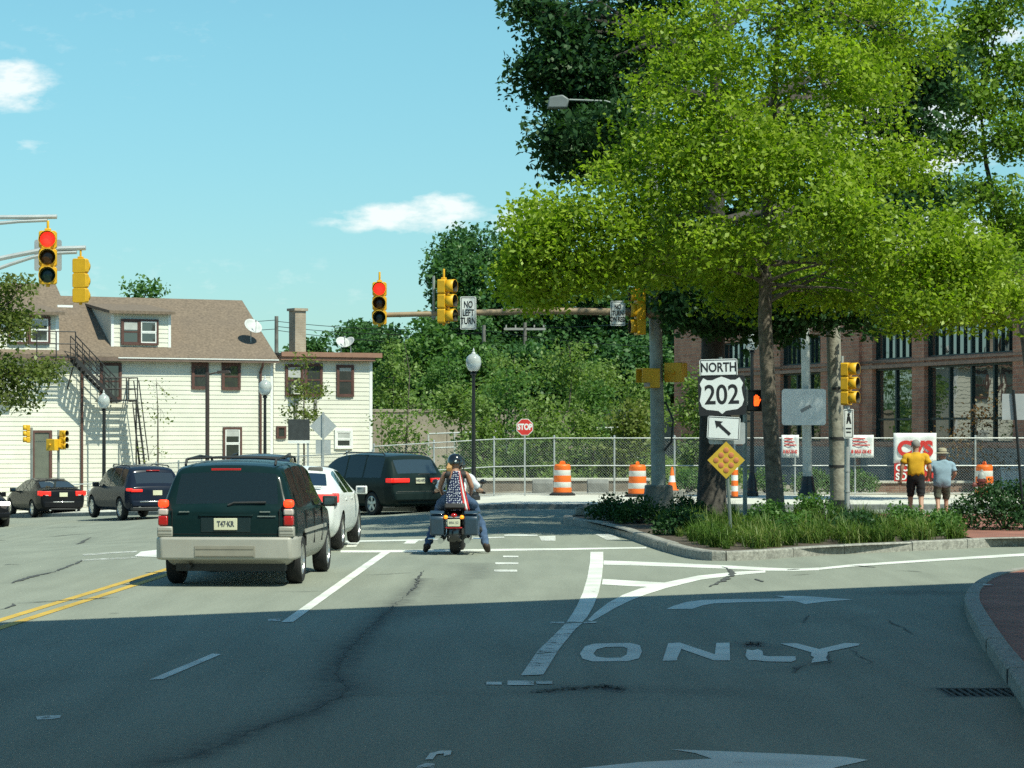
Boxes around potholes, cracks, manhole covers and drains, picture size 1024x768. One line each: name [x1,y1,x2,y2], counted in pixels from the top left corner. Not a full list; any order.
crack [159,570,424,762]
crack [710,566,736,586]
drain grate [936,669,1016,697]
crack [5,526,91,583]
